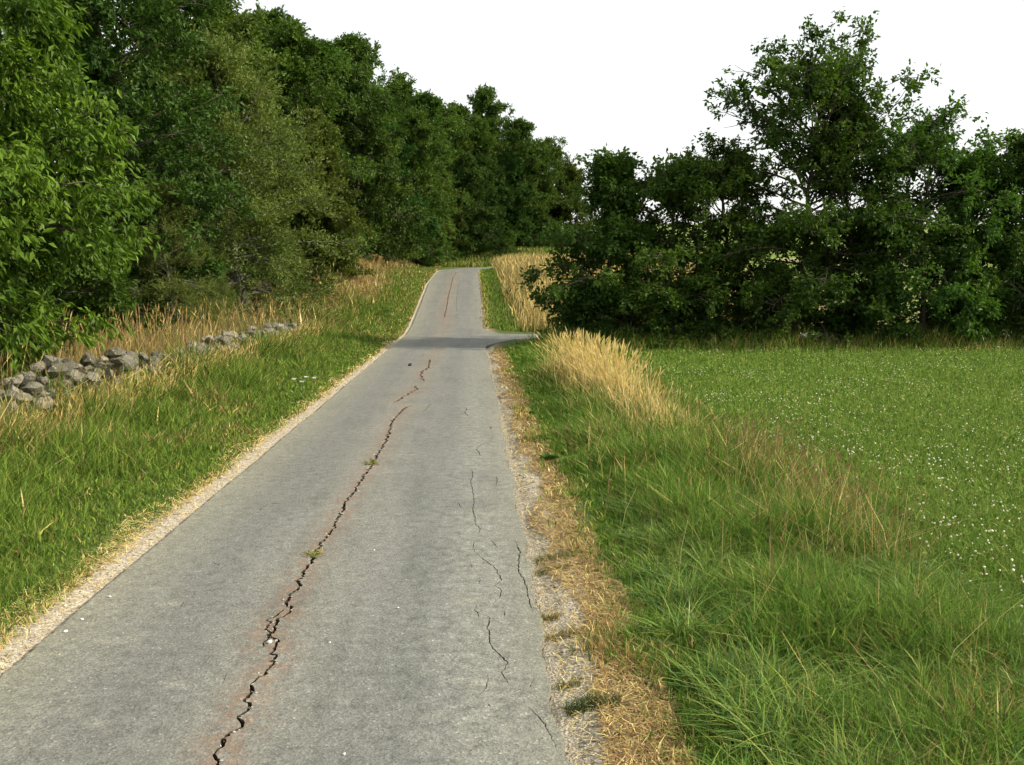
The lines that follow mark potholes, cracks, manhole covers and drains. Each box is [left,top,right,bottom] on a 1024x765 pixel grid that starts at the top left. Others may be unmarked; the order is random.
crack [212,359,431,765]
crack [458,472,533,706]
